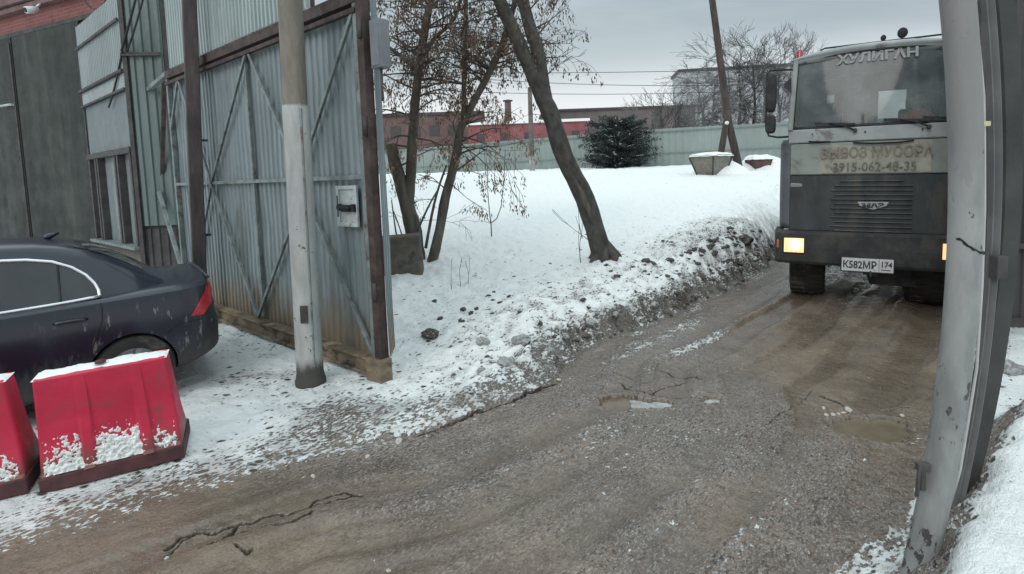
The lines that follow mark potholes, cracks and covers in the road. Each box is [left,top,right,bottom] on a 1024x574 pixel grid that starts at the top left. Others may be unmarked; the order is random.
pothole [593,391,681,414]
pothole [814,412,924,447]
crack [410,381,561,439]
crack [156,489,370,561]
crack [760,389,916,428]
crack [605,365,704,400]
